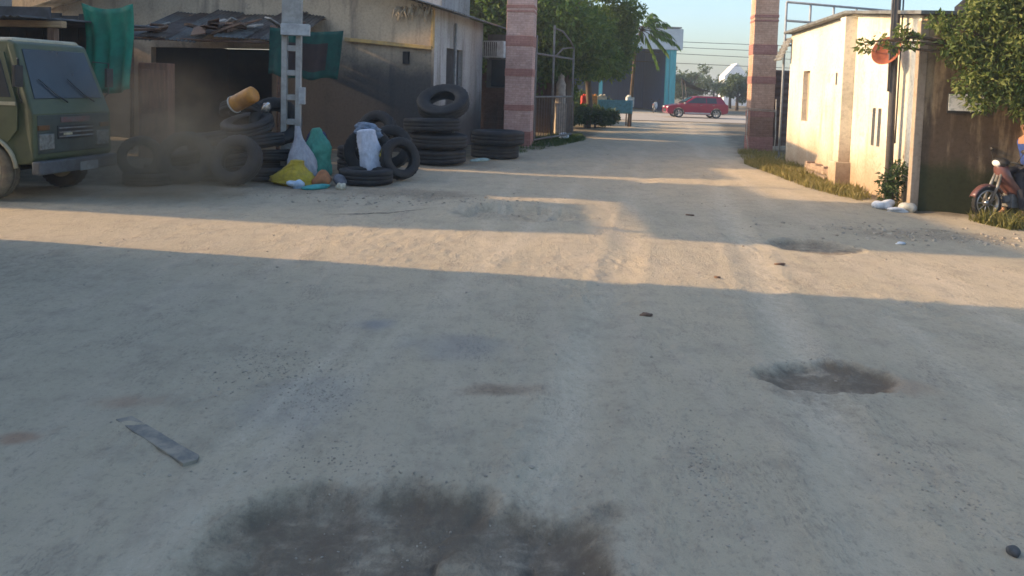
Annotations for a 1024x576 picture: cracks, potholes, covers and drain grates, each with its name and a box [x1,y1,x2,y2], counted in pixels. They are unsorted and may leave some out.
pothole [761,237,872,255]
pothole [747,357,905,396]
